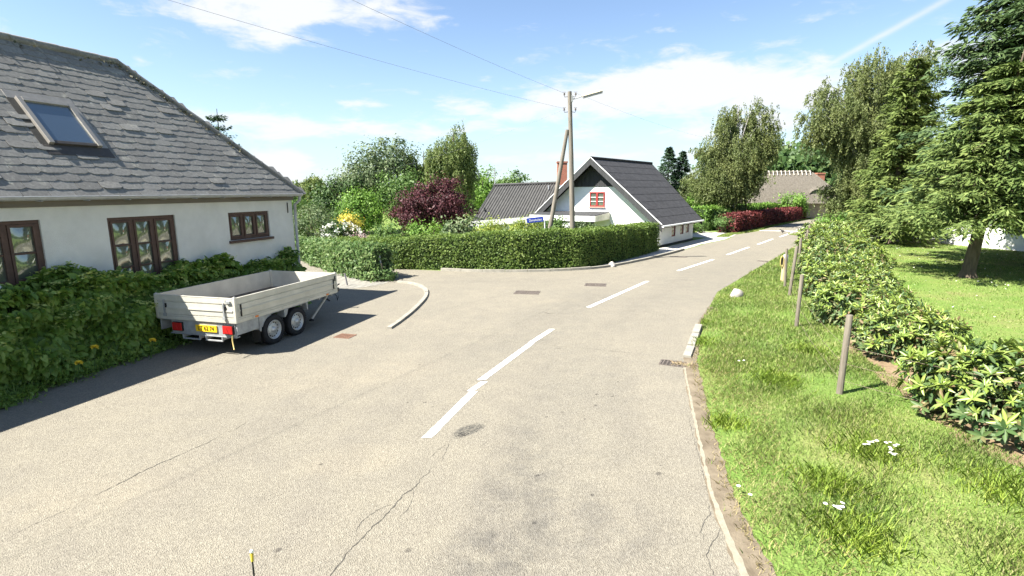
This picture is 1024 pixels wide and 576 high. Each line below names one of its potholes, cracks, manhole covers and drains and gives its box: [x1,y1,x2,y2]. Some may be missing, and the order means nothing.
crack [330,444,449,576]
crack [0,426,240,542]
crack [689,420,719,576]
drain grate [658,359,694,368]
